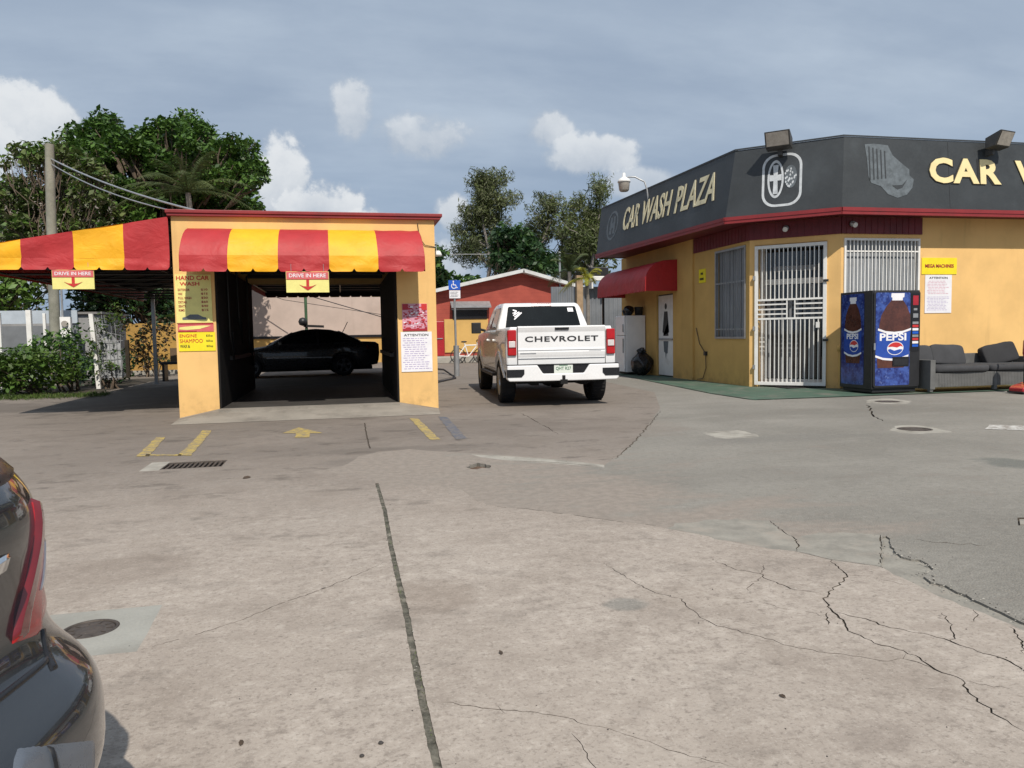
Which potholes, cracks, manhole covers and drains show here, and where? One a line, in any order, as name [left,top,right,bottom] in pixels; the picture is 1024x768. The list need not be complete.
manhole cover [64,619,120,639]
crack [141,564,381,650]
crack [442,702,734,768]
drain grate [160,460,227,470]
crack [606,560,1024,731]
crack [617,414,658,458]
